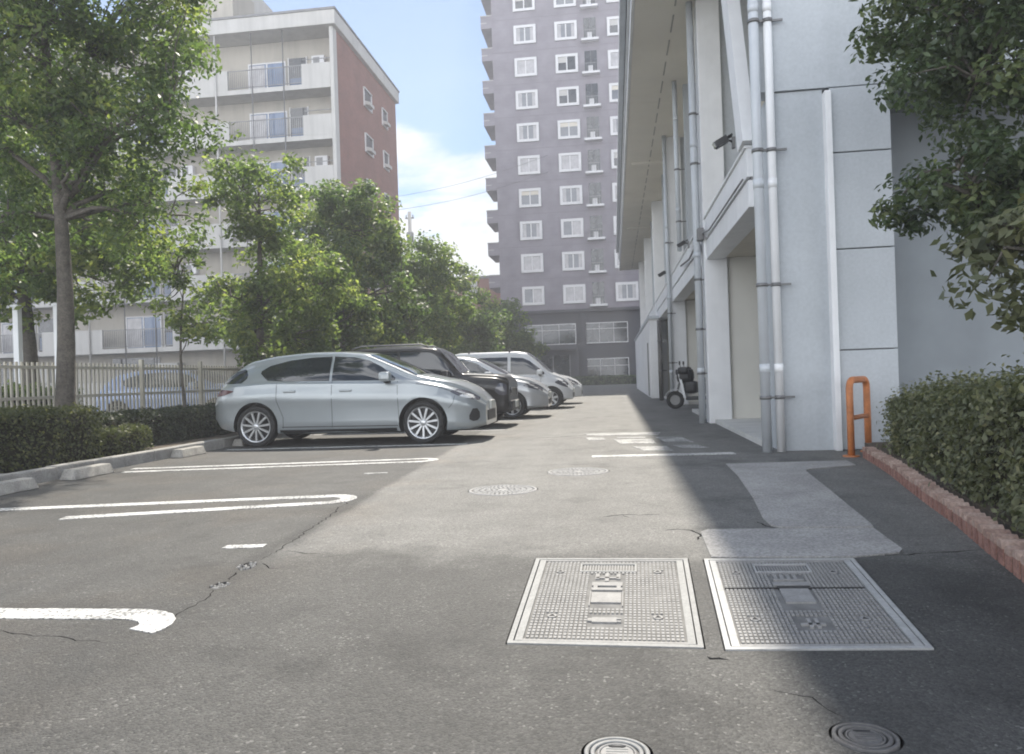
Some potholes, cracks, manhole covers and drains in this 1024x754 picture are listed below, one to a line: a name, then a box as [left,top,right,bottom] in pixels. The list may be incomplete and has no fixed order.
manhole cover [704,558,934,651]
manhole cover [584,737,650,754]
manhole cover [469,485,537,495]
manhole cover [548,468,609,476]
crack [4,631,104,643]
crack [606,514,702,540]
crack [771,689,845,717]
manhole cover [832,722,901,754]
manhole cover [507,558,704,649]
